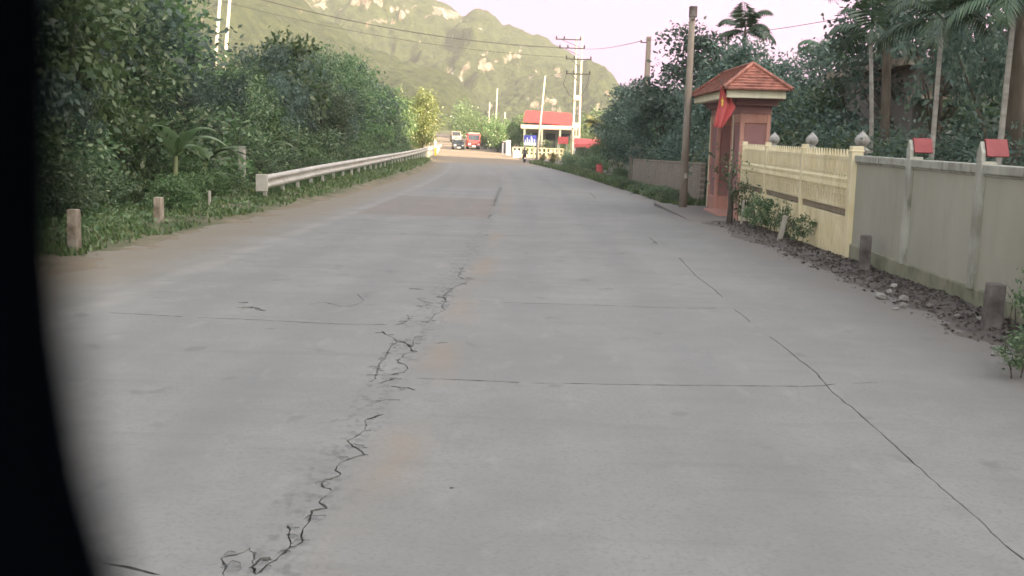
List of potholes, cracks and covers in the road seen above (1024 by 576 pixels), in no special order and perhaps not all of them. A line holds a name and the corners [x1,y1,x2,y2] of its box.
crack [122,188,1024,575]
